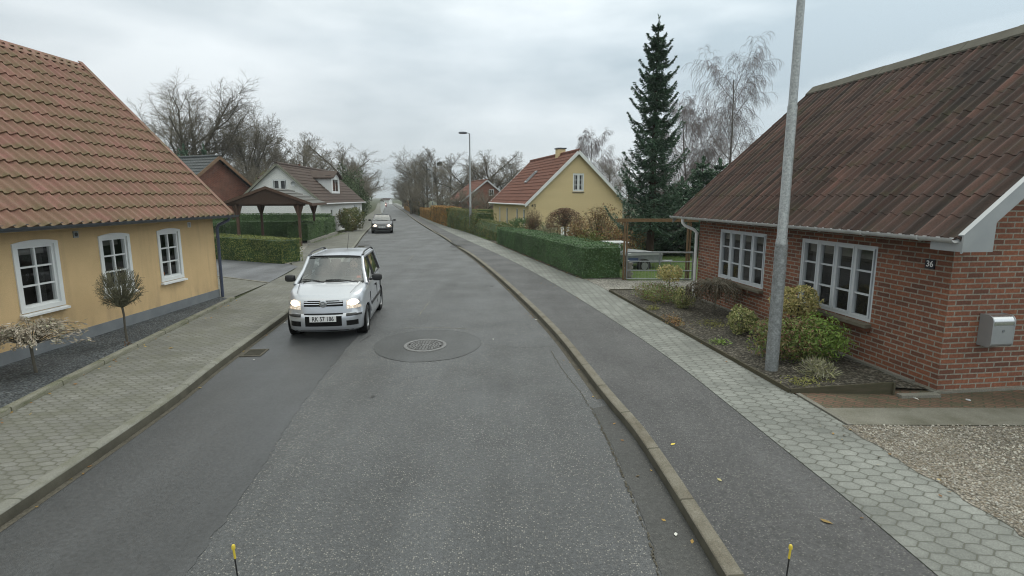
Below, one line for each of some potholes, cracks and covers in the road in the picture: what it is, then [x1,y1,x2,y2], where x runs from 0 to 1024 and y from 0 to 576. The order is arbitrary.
drain grate [239,349,269,357]
manhole cover [404,339,447,352]
